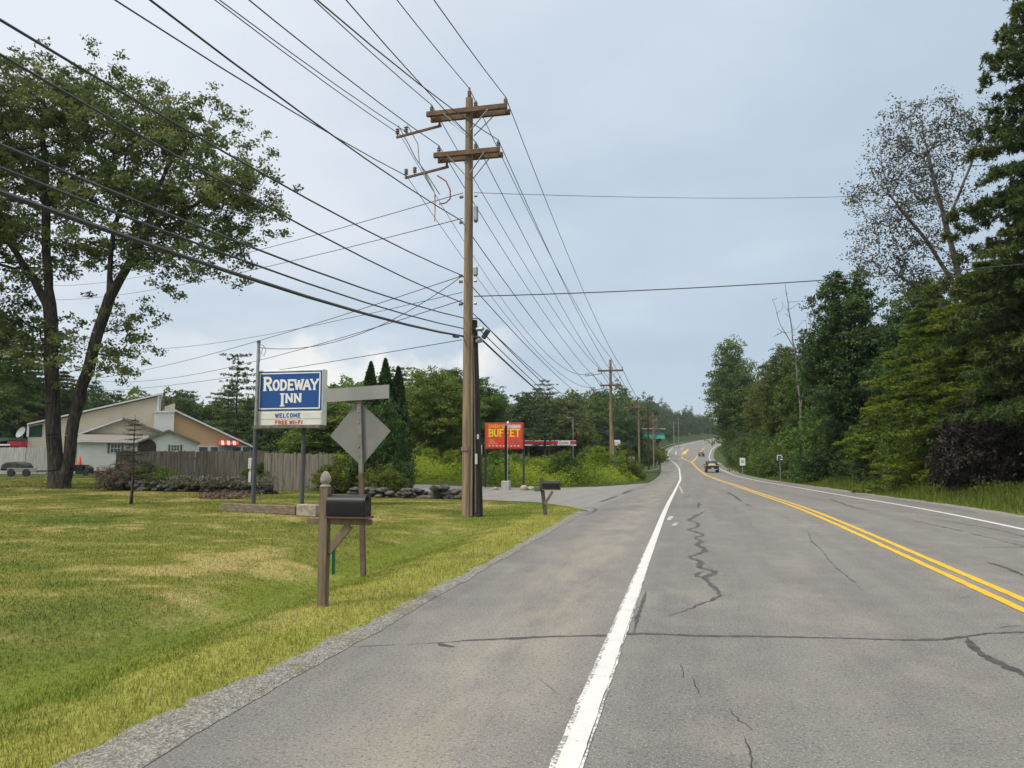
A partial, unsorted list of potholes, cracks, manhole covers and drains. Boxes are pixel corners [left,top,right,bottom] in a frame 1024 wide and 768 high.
crack [730,709,754,768]
crack [916,520,1024,576]
